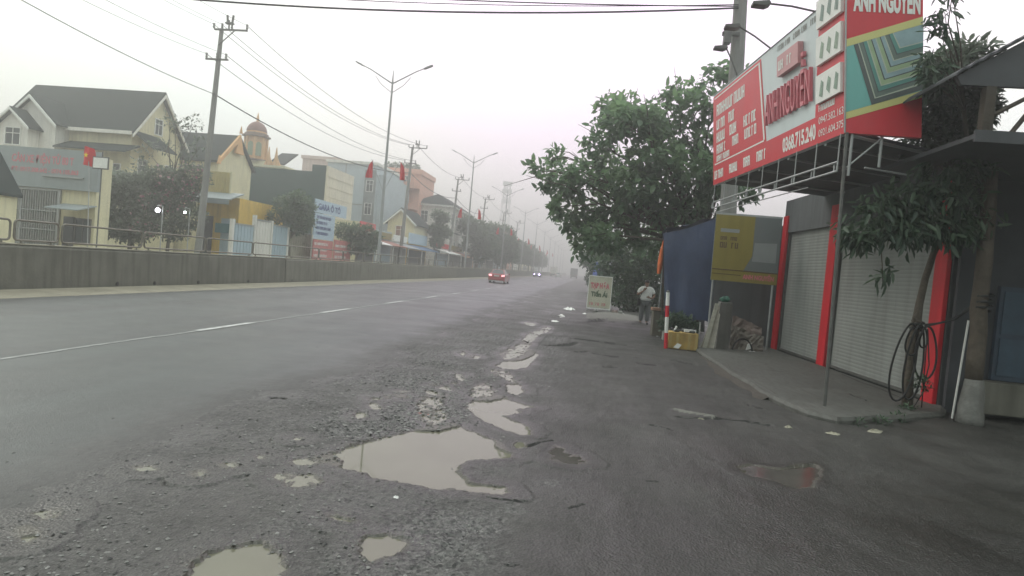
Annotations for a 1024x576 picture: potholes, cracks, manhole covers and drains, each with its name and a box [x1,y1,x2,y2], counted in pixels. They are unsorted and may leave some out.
pothole [271,471,325,489]
pothole [288,457,321,466]
pothole [521,326,552,344]
pothole [309,421,515,495]
pothole [416,392,450,427]
pothole [183,538,288,576]
pothole [468,382,499,399]
pothole [356,532,412,564]
pothole [464,395,535,435]
crack [528,439,554,447]
pothole [504,380,526,395]
crack [649,404,770,431]
